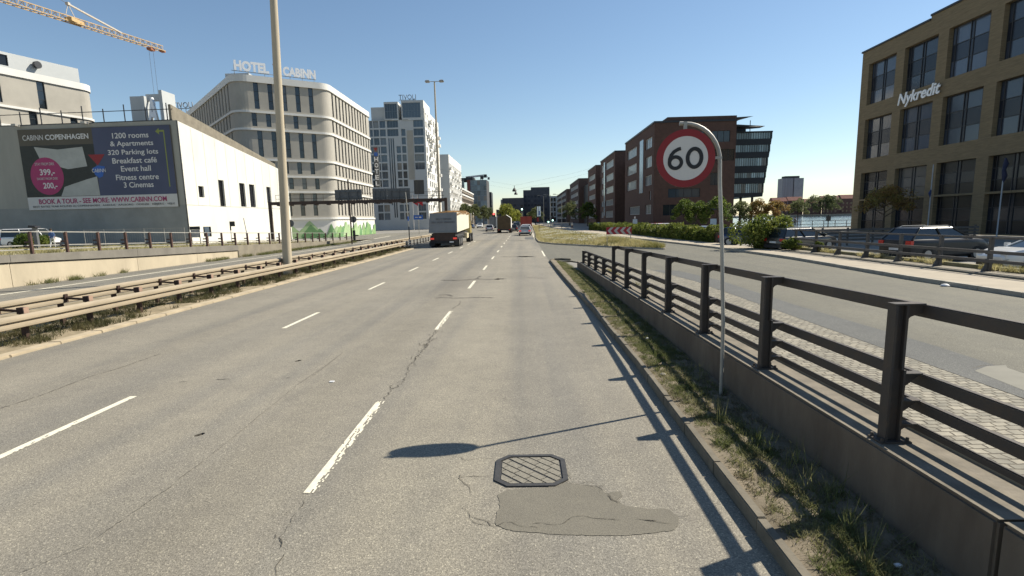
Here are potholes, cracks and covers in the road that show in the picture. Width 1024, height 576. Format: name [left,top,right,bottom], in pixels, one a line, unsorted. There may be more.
crack [383,330,437,399]
manhole cover [494,454,568,487]
crack [459,457,689,527]
